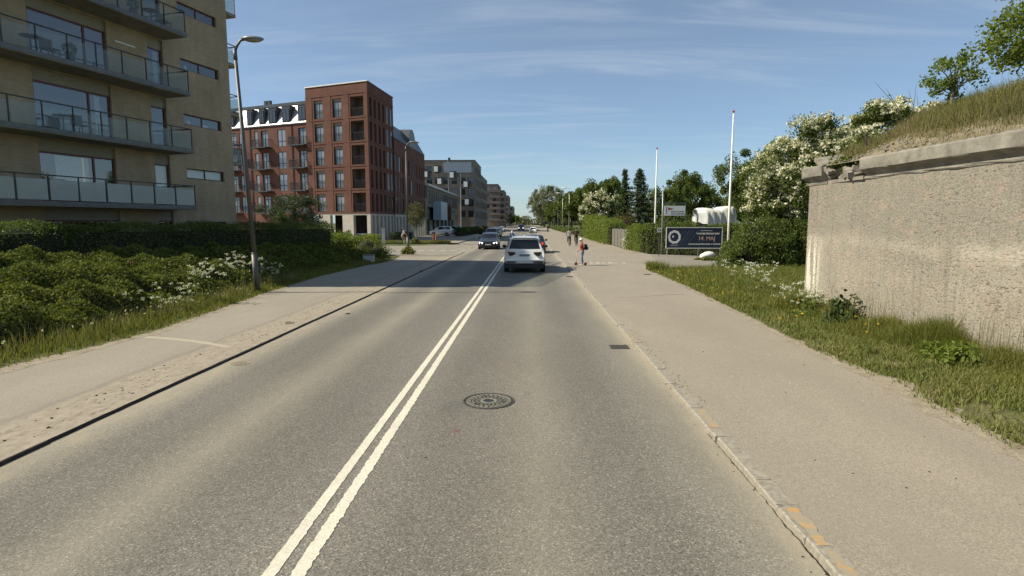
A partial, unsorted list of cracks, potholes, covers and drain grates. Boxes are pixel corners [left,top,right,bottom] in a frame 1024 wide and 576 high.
manhole cover [463,393,515,409]
